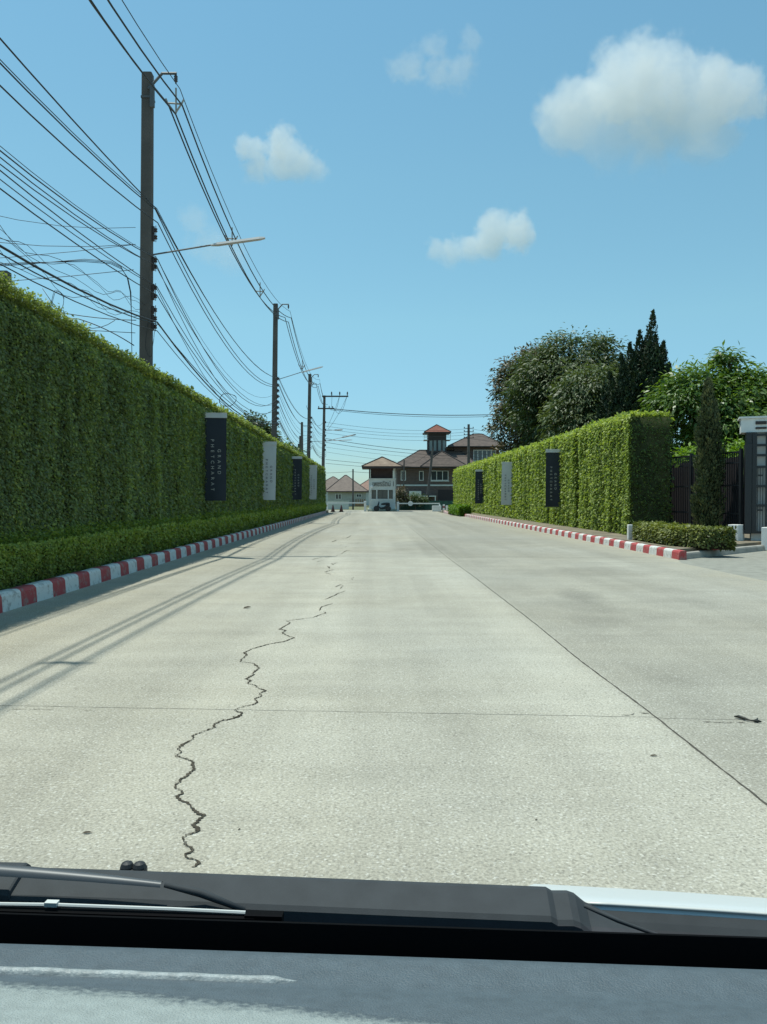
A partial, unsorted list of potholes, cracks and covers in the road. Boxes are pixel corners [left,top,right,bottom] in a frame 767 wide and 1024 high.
crack [174,591,344,867]
